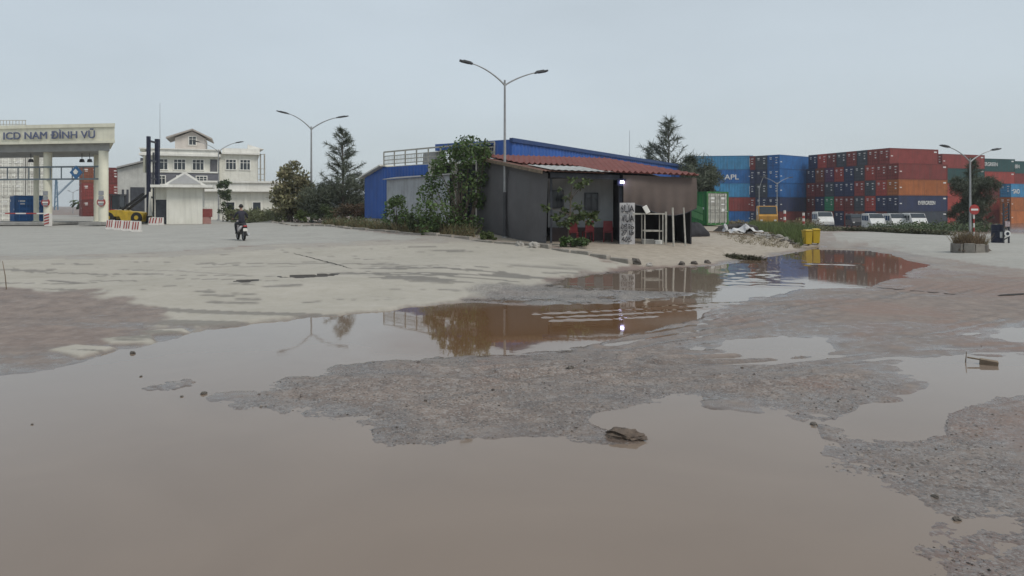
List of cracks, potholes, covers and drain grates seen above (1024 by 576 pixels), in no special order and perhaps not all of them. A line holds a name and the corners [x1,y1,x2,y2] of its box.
pothole [820,353,1024,448]
pothole [569,403,838,455]
pothole [736,247,924,289]
pothole [470,300,713,356]
pothole [708,335,847,359]
